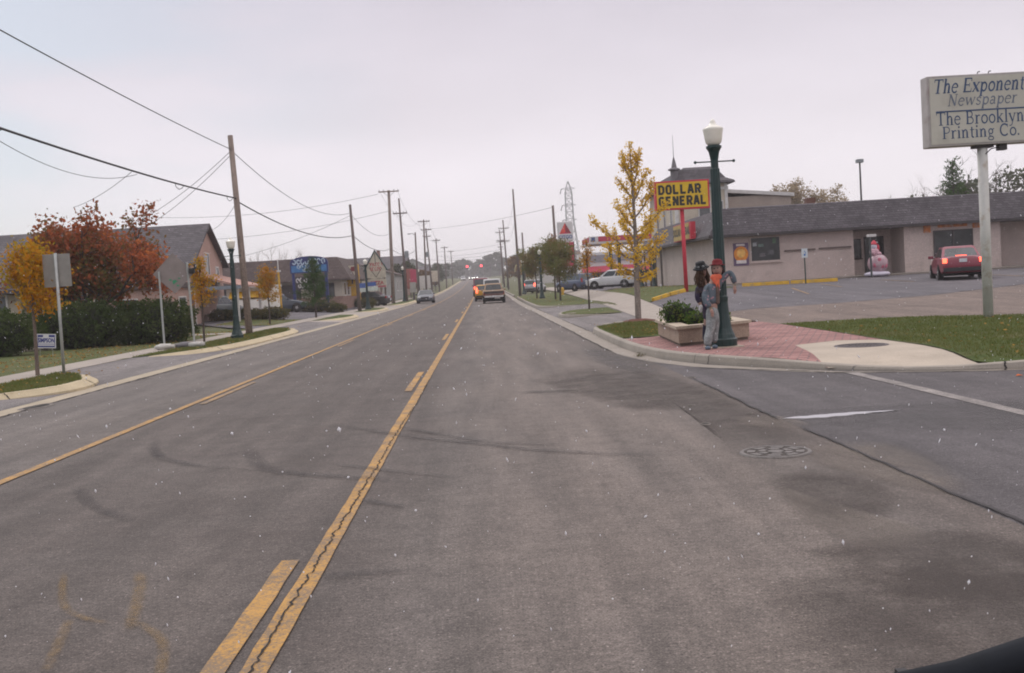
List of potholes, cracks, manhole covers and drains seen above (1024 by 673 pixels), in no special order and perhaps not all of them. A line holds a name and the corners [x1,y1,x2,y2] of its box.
manhole cover [739,445,813,459]
